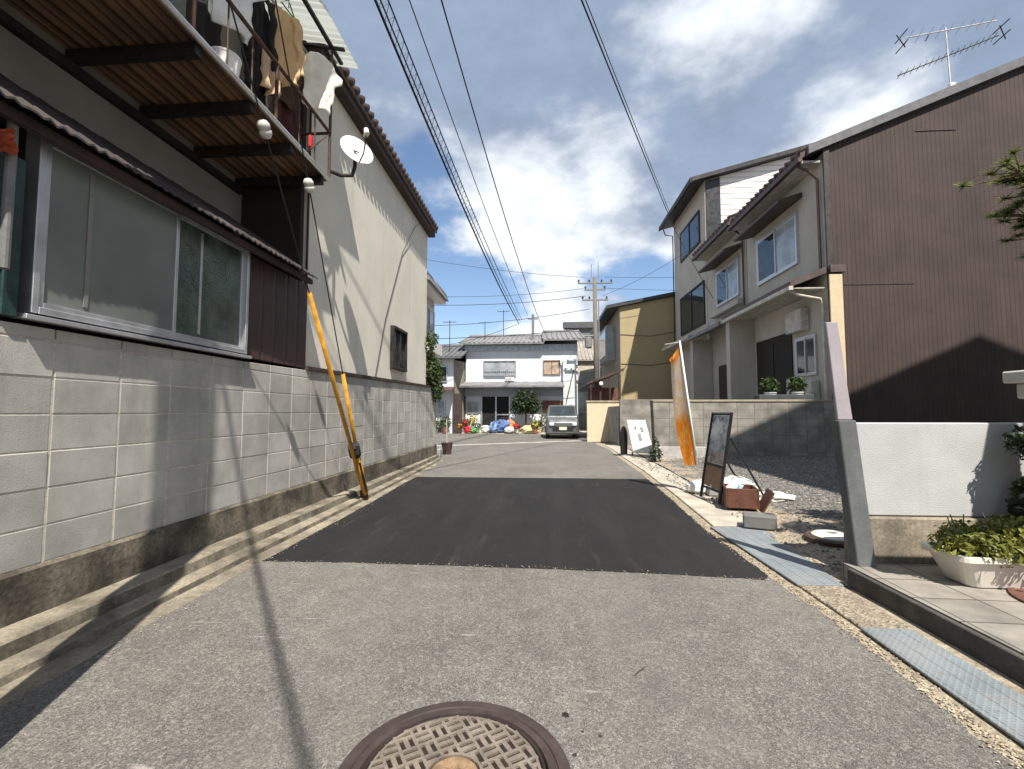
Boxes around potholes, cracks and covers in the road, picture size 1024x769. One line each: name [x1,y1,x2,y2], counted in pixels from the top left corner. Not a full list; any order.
manhole cover [338,701,571,769]
